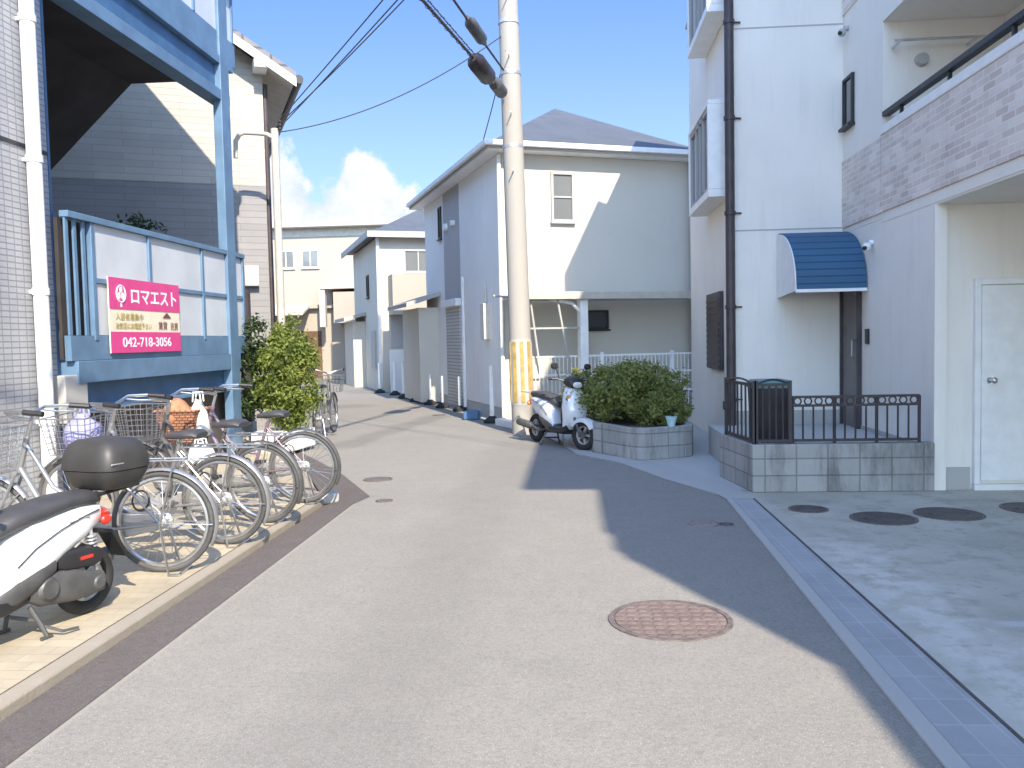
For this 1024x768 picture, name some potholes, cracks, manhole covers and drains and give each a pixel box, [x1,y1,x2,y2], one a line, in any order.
utility cover [687,519,720,527]
manhole cover [608,600,734,642]
